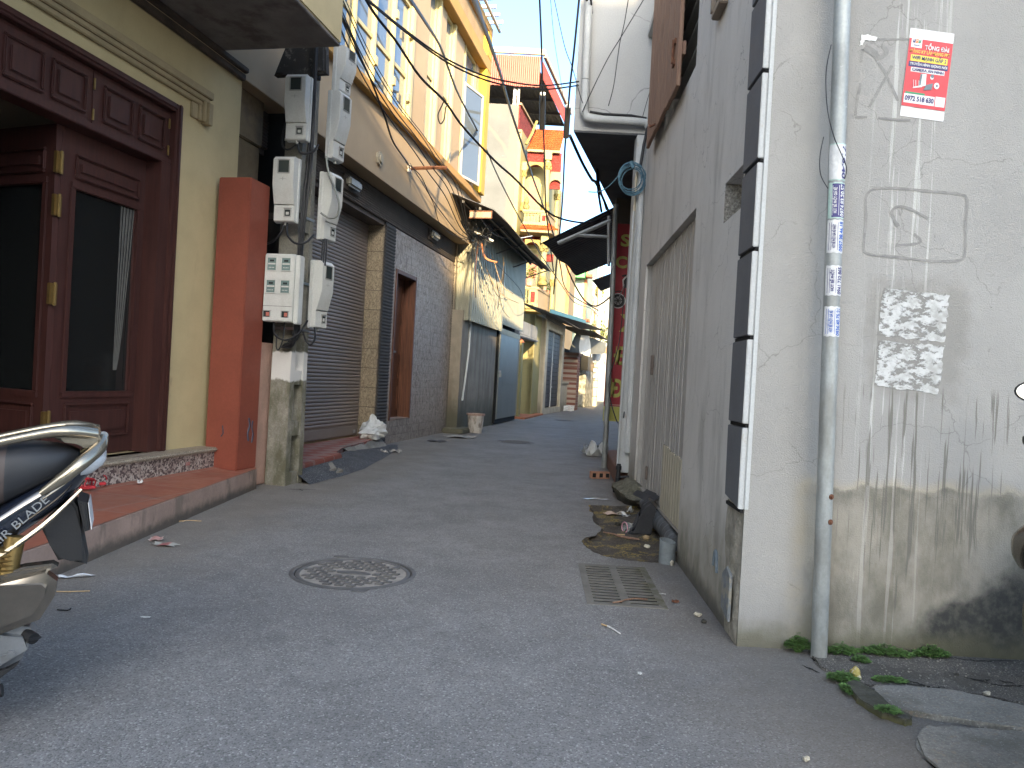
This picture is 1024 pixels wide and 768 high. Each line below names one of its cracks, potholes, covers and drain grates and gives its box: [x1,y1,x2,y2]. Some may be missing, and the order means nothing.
drain grate [578,563,668,609]
pothole [582,505,677,563]
crack [965,677,1024,687]
manhole cover [289,555,416,593]
